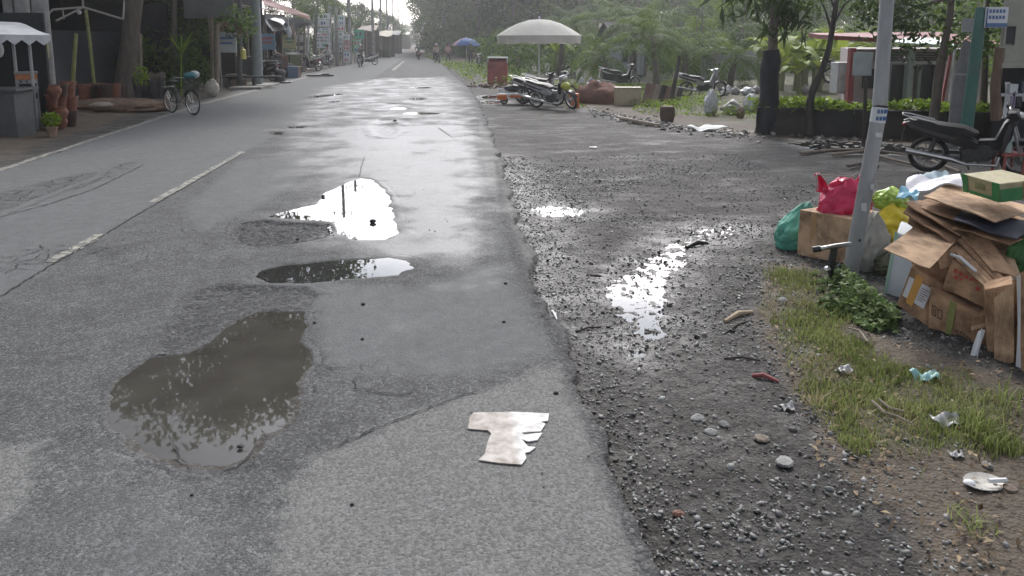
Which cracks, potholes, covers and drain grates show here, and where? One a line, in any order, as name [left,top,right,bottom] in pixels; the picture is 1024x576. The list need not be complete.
pothole [96,309,321,481]
pothole [257,176,415,243]
pothole [222,219,333,250]
pothole [245,254,426,285]
